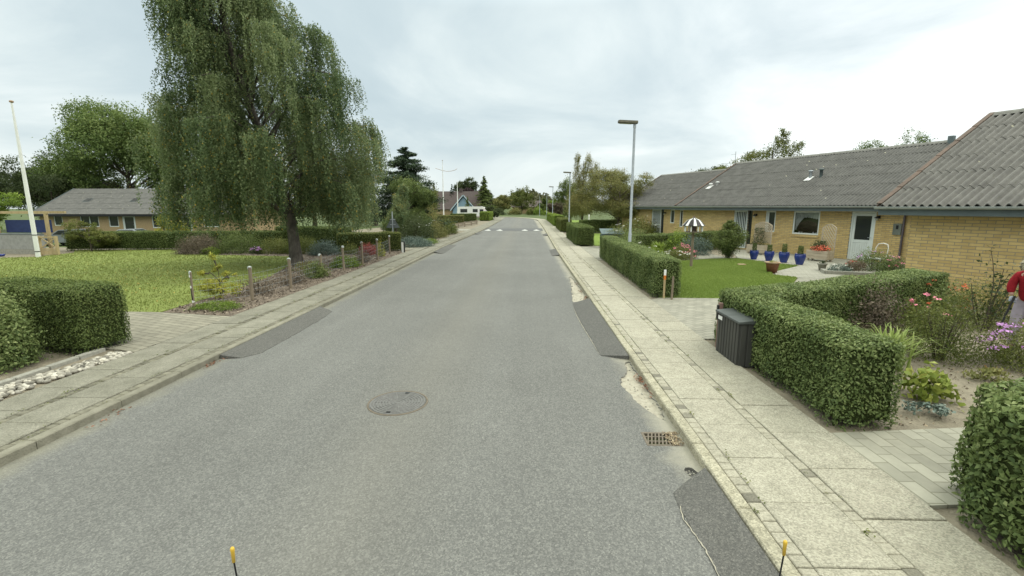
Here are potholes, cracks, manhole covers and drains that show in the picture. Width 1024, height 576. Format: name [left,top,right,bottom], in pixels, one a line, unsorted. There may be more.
pothole [620,362,664,420]
pothole [569,277,586,302]
manhole cover [367,391,428,416]
drain grate [641,431,684,446]
